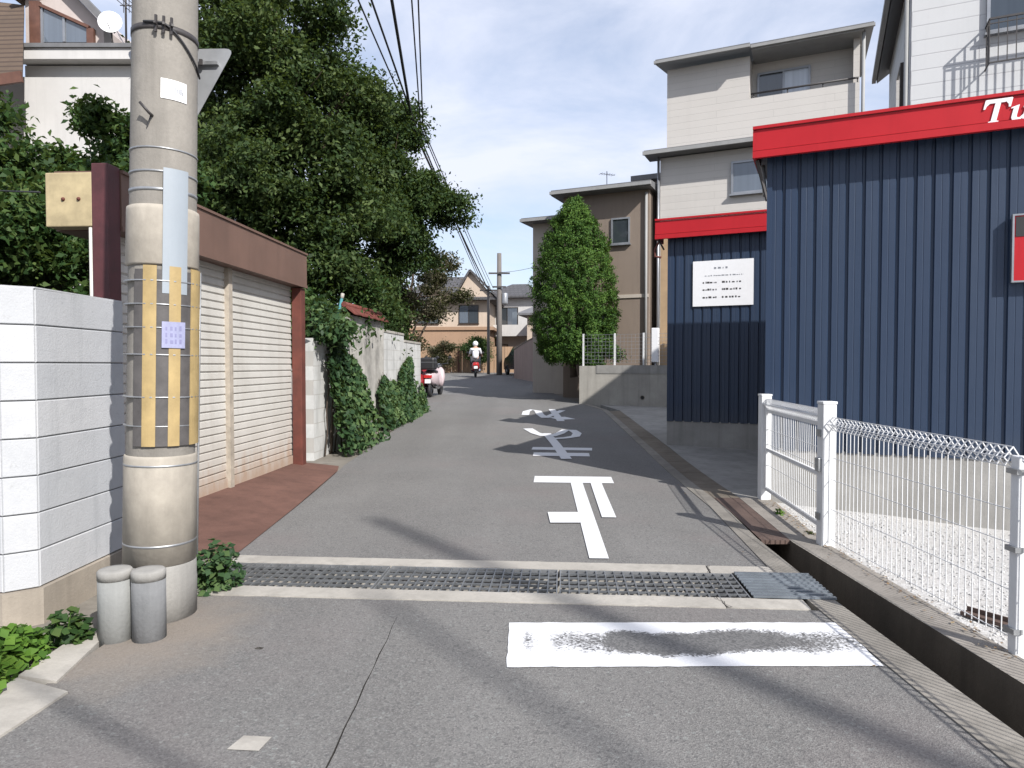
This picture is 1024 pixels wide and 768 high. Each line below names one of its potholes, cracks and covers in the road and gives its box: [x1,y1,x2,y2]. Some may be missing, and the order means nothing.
crack [326,623,394,768]
